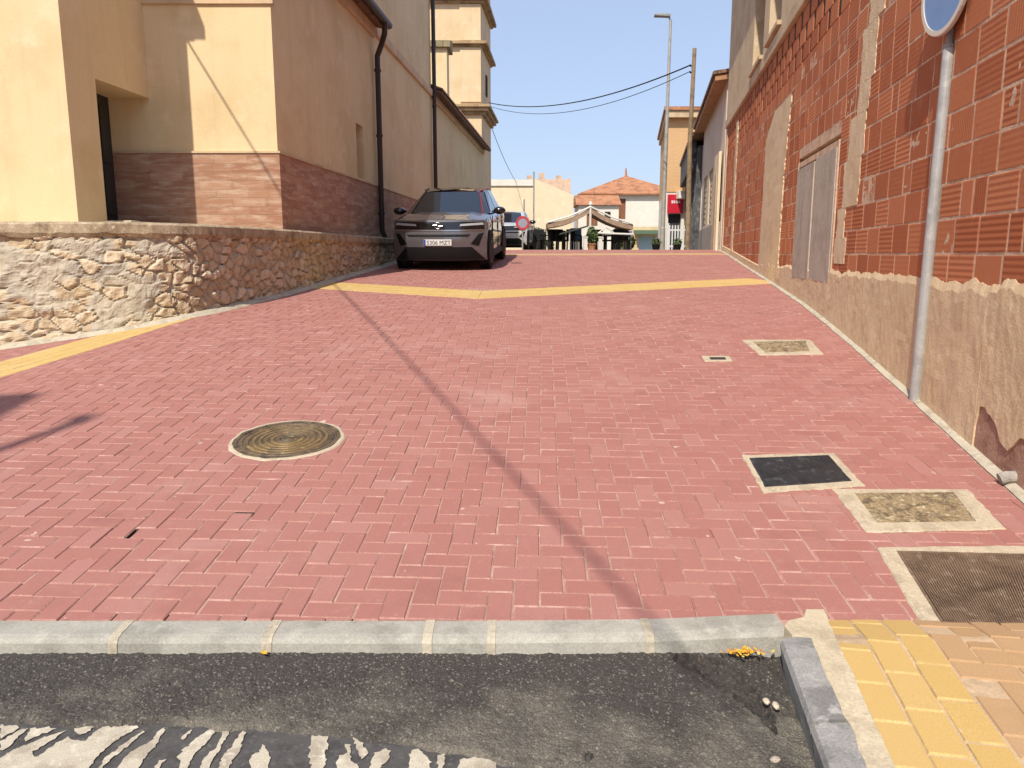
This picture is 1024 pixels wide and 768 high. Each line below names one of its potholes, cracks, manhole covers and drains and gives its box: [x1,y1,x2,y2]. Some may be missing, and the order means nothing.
manhole cover [832,489,1007,533]
manhole cover [742,453,865,494]
manhole cover [228,420,345,461]
manhole cover [742,340,824,355]
